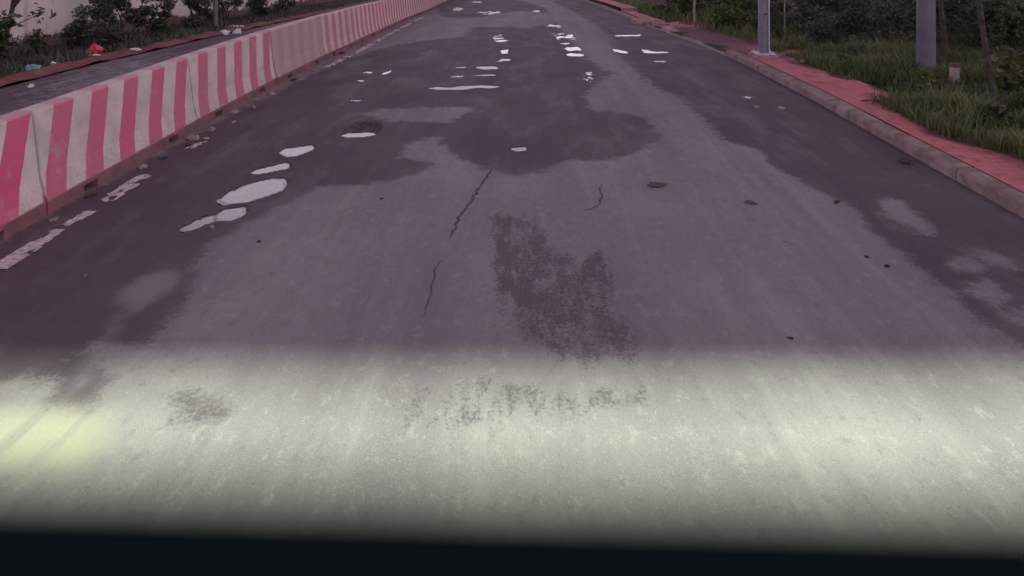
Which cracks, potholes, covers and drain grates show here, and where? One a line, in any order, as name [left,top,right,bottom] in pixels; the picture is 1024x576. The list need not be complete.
pothole [328,119,394,141]
crack [450,169,492,236]
